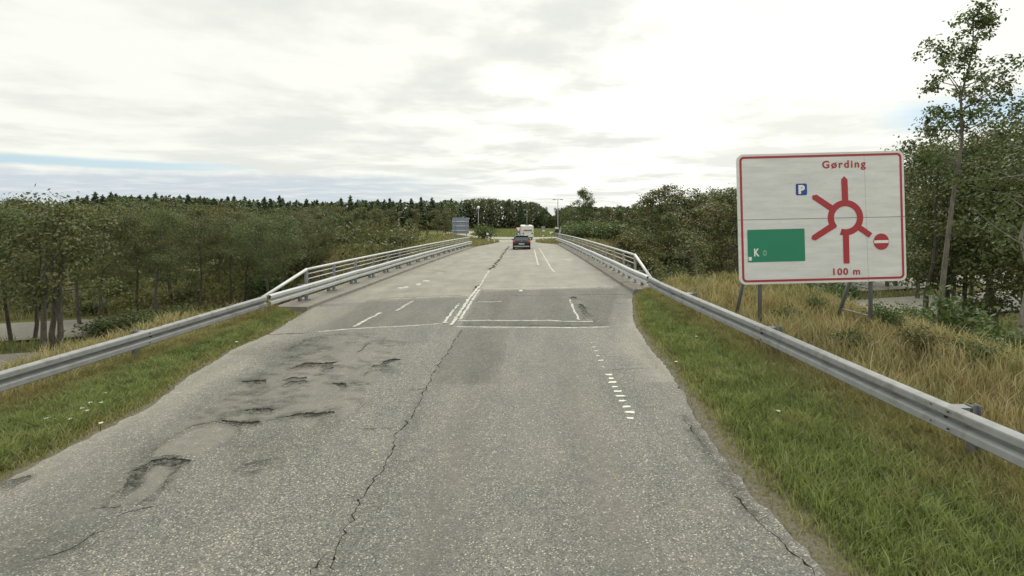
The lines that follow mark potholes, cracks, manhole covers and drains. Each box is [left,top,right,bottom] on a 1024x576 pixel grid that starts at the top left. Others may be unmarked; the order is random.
pothole [222,419,261,427]
pothole [0,475,32,491]
pothole [281,411,335,419]
pothole [372,359,400,370]
pothole [109,457,192,506]
crack [22,501,158,566]
pothole [286,361,337,372]
crack [310,330,462,575]
